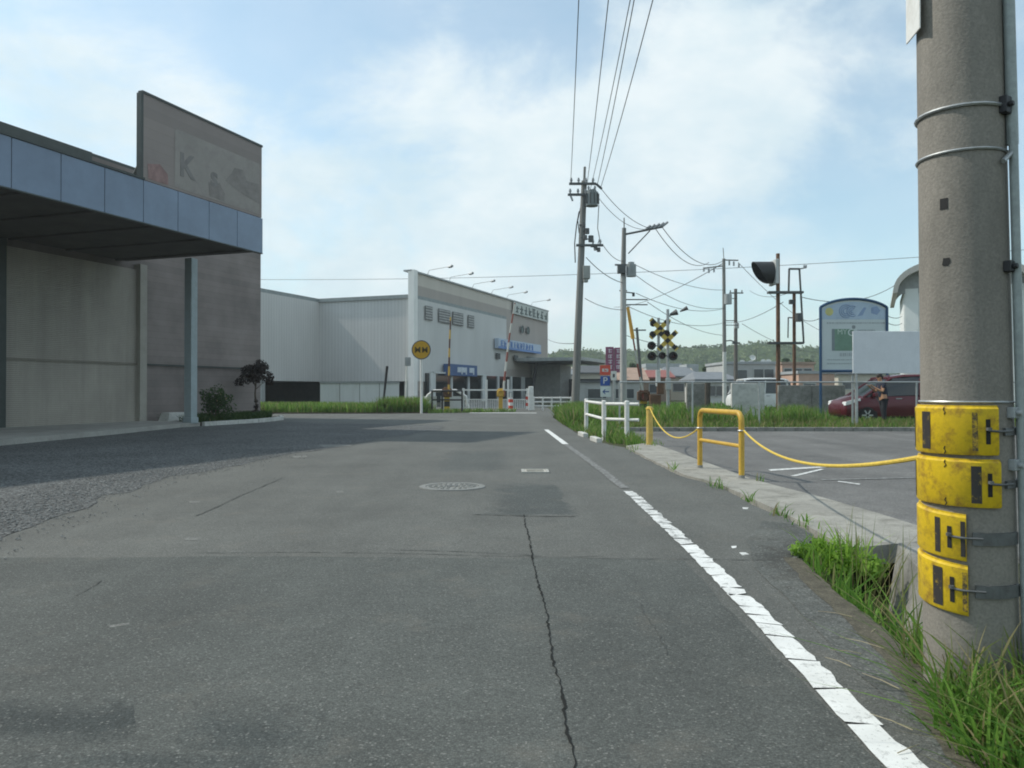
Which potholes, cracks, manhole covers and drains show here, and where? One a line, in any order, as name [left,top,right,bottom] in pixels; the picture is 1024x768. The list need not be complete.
manhole cover [419,482,485,491]
crack [398,515,578,768]
